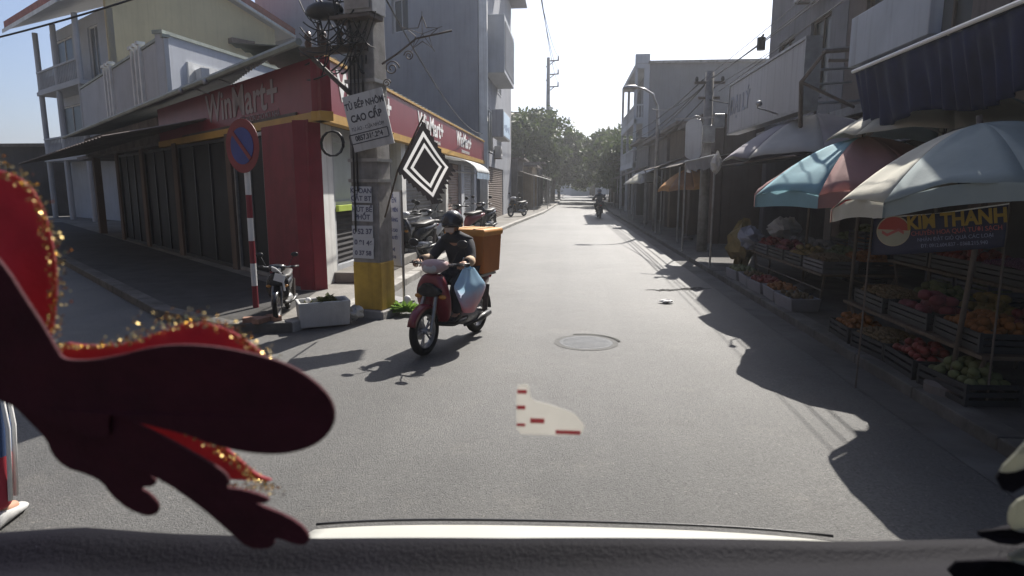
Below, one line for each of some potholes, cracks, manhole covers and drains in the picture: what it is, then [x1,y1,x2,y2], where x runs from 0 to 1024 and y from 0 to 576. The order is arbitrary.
manhole cover [554,334,620,351]
